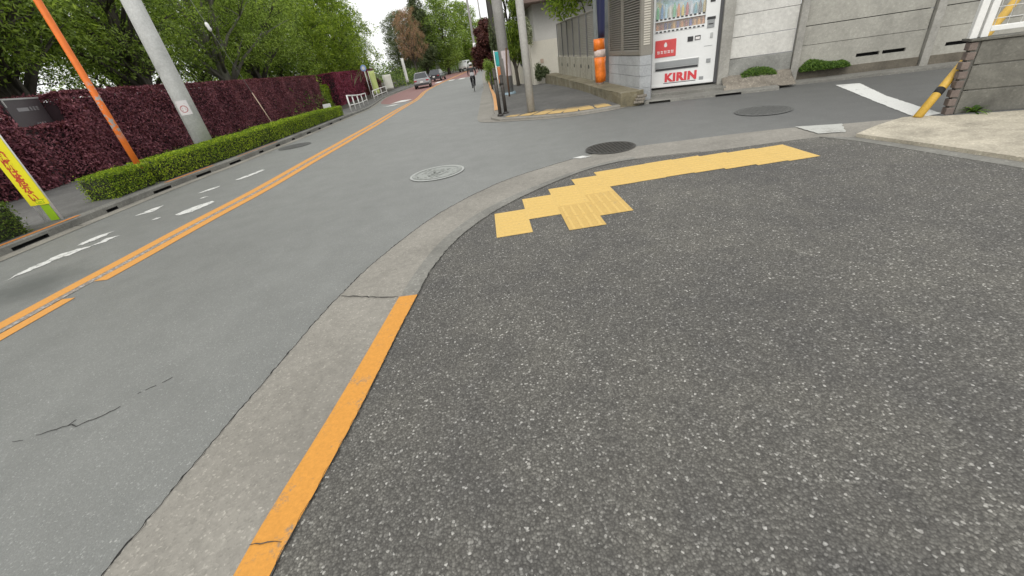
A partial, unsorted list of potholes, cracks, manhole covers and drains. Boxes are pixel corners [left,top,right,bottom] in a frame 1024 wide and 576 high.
crack [12,377,172,442]
manhole cover [410,165,464,181]
manhole cover [734,105,794,116]
manhole cover [585,141,636,154]
manhole cover [278,142,311,150]
